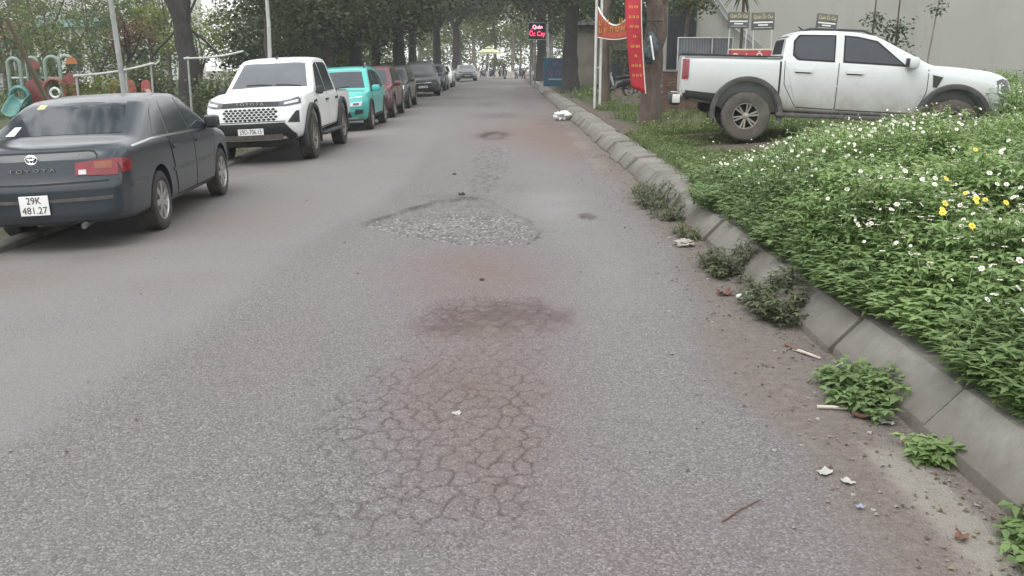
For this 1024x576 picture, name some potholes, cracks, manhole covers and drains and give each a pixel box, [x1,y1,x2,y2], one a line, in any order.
pothole [474,131,511,139]
pothole [348,195,556,249]
crack [226,291,596,576]
